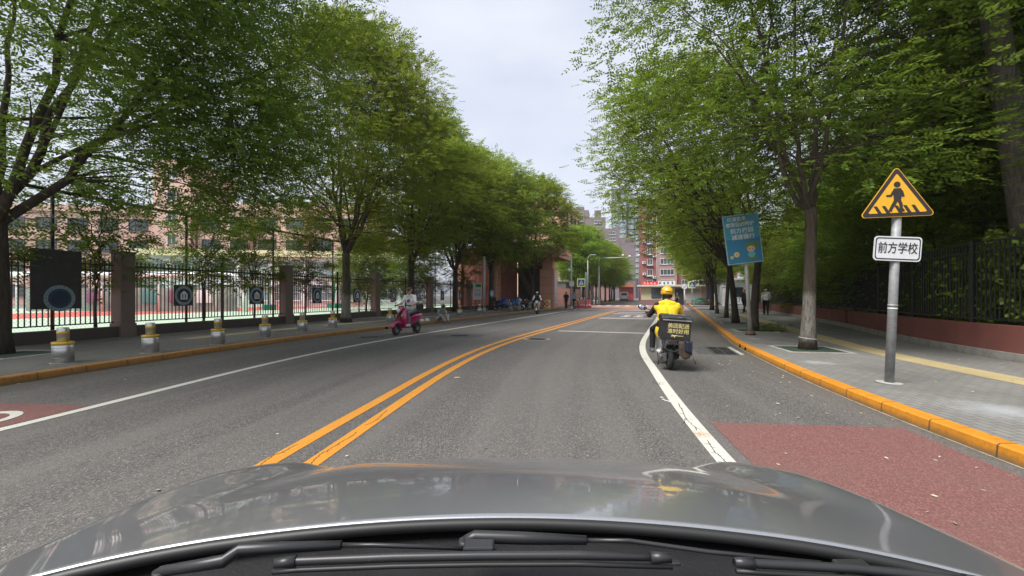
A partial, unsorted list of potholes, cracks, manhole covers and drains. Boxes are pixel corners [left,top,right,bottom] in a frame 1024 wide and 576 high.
drain grate [692,347,744,355]
crack [260,410,387,465]
crack [678,403,726,462]
